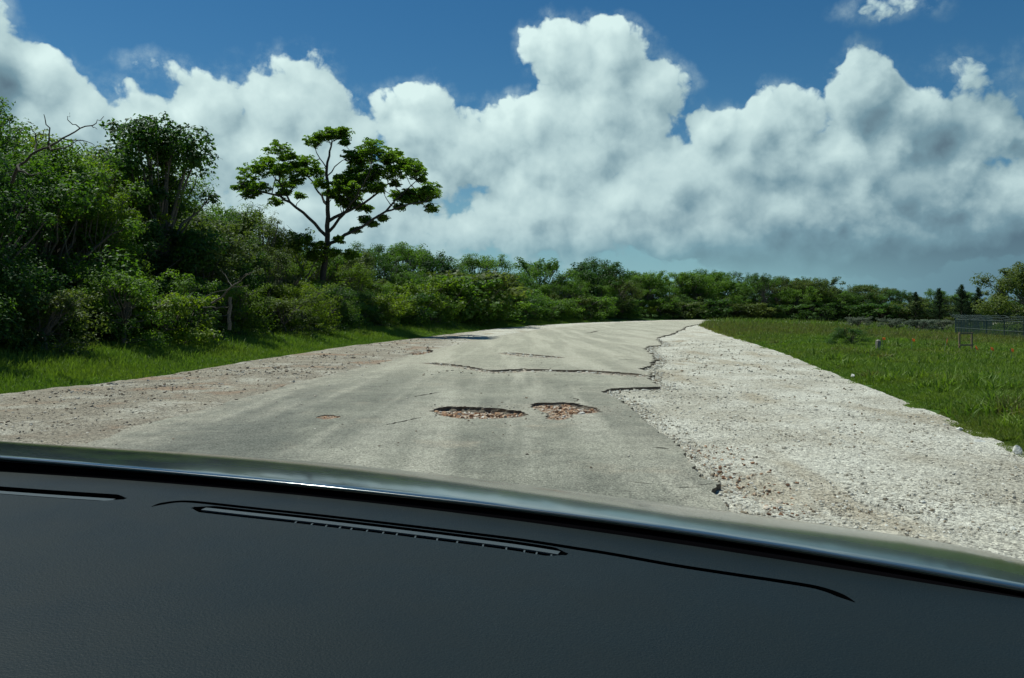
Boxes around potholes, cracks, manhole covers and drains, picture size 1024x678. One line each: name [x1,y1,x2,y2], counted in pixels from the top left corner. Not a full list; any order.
pothole [430,406,529,419]
crack [415,359,648,397]
pothole [530,402,601,420]
